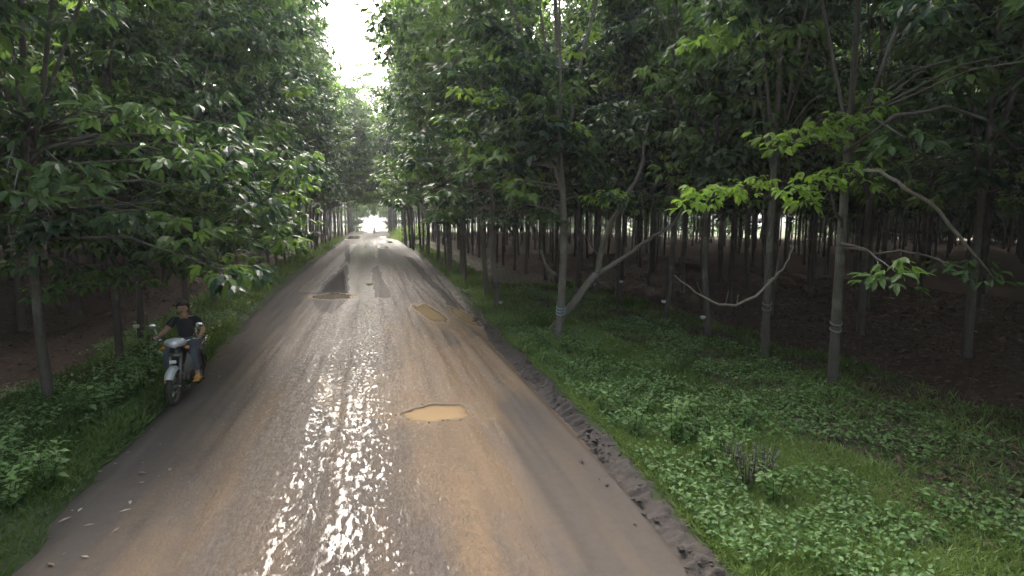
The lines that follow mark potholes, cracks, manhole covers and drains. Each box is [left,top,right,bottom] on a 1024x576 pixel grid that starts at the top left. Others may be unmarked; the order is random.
pothole [447,305,485,330]
pothole [394,402,479,423]
pothole [410,303,452,325]
